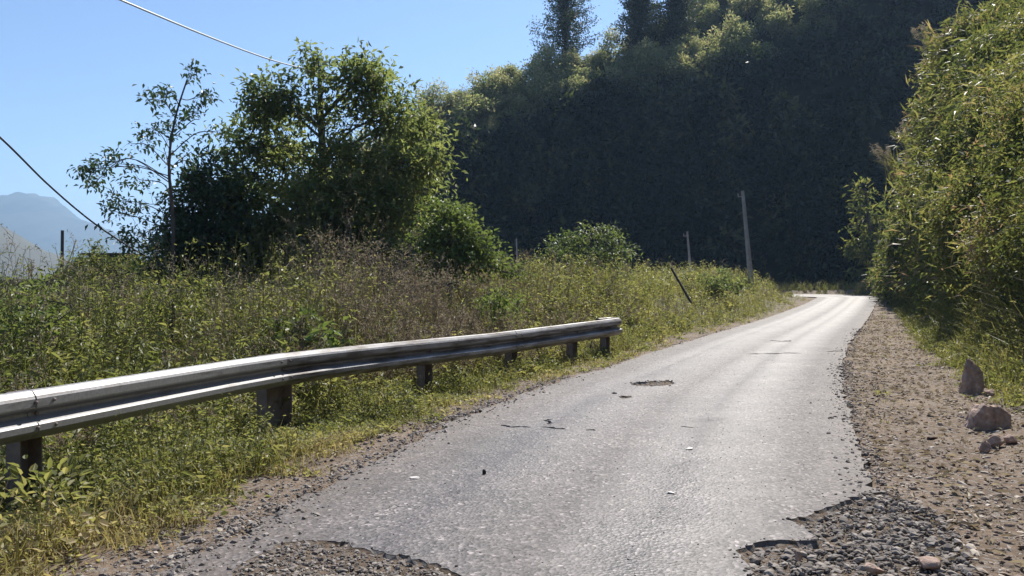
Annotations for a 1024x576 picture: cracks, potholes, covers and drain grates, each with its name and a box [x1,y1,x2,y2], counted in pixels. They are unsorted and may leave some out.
crack [501,419,595,431]
